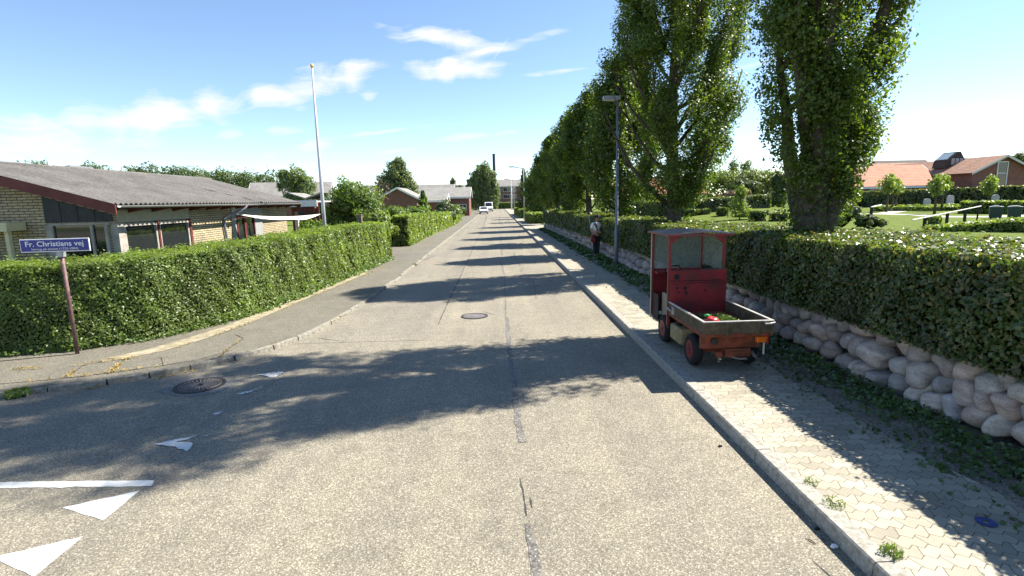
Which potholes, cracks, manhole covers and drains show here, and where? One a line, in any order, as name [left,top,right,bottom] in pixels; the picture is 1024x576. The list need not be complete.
manhole cover [172,377,227,394]
